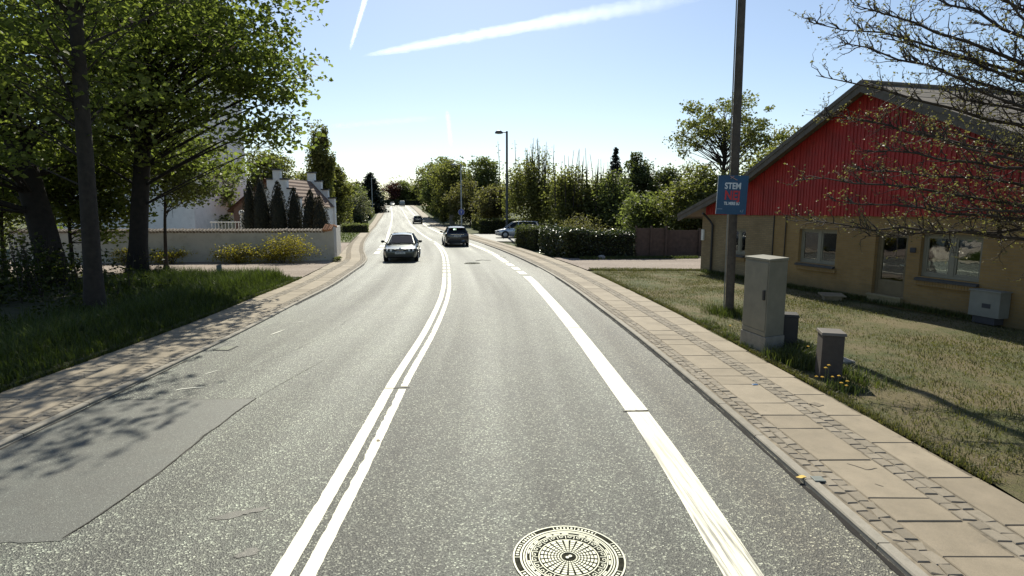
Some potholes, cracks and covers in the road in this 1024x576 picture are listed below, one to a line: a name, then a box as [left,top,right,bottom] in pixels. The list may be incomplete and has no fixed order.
manhole cover [513,526,626,576]
